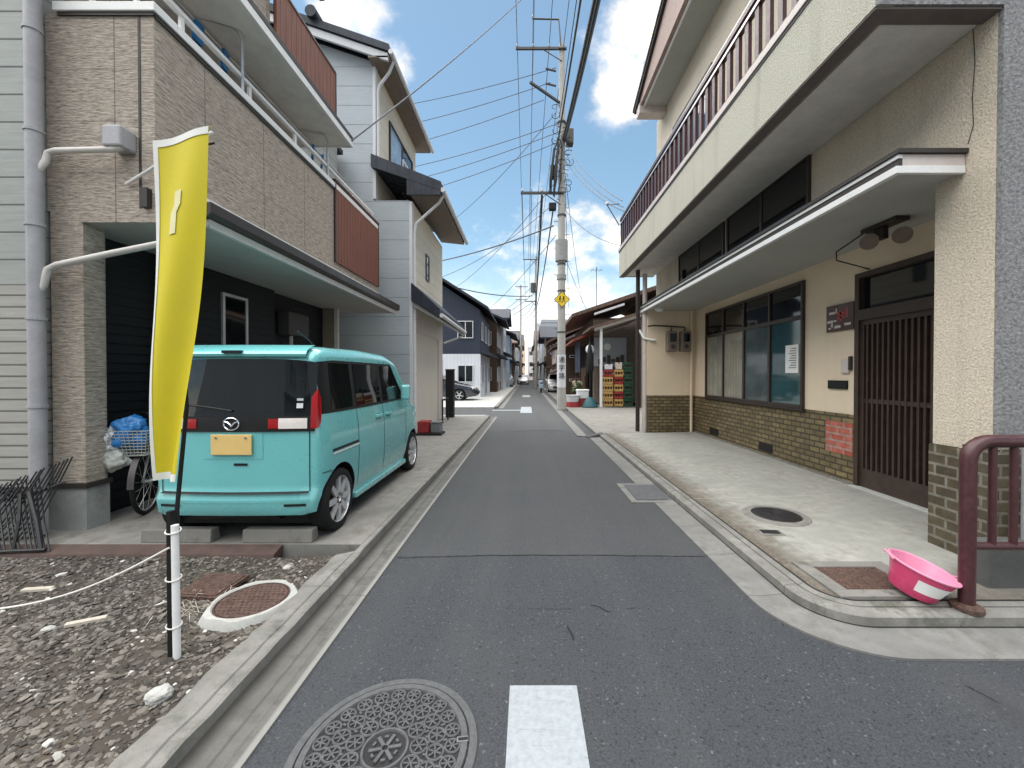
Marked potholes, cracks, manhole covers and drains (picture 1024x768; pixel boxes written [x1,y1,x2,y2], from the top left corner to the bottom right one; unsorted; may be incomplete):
manhole cover [197,579,298,632]
manhole cover [742,505,812,527]
manhole cover [283,679,478,768]
